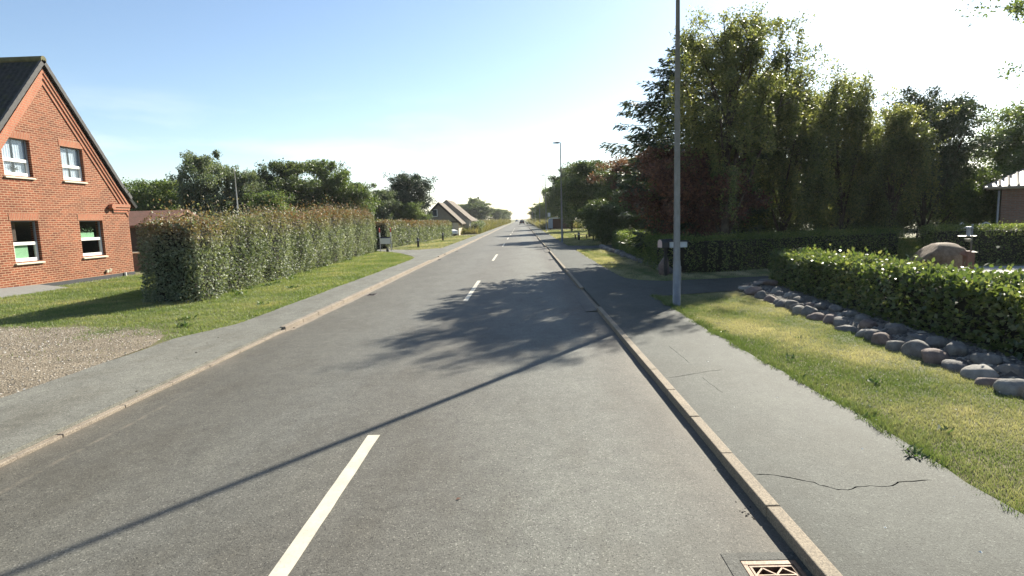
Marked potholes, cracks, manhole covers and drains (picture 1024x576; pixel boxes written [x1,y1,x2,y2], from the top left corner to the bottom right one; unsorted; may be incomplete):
crack [757,474,925,490]
drain grate [740,560,807,576]
